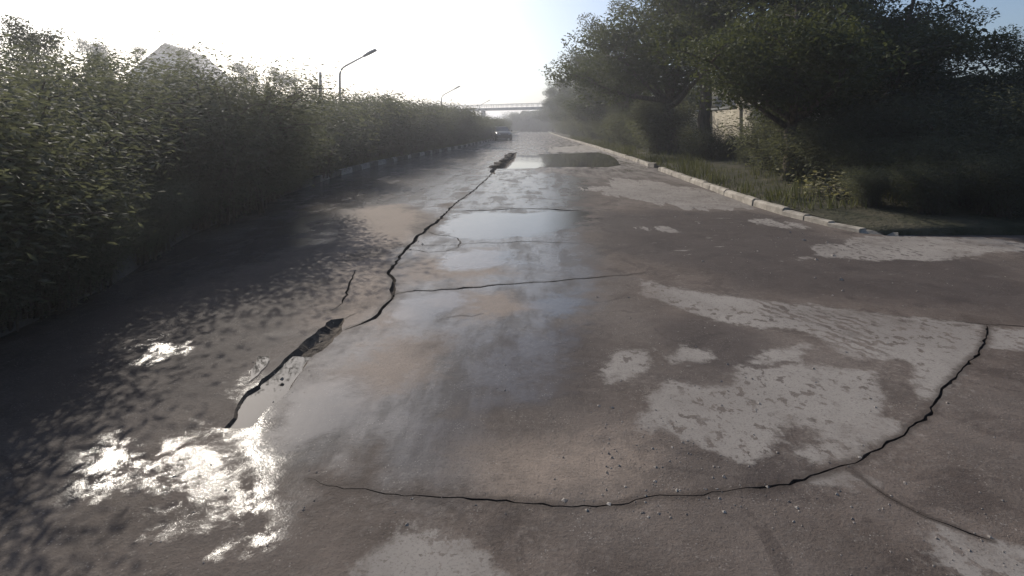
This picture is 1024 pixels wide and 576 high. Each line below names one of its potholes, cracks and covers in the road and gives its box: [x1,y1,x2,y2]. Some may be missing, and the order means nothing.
crack [339,173,641,330]
pothole [489,152,517,174]
pothole [224,318,344,429]
crack [308,321,1015,541]
